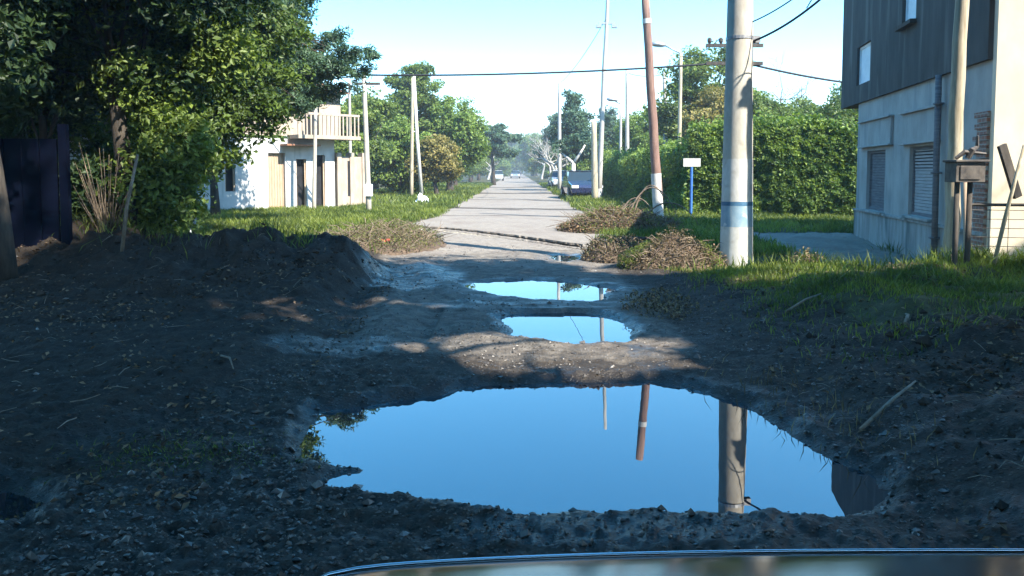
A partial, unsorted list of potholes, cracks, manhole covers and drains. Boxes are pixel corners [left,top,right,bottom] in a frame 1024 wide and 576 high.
pothole [278,369,920,520]
pothole [485,306,645,344]
pothole [455,276,624,301]
